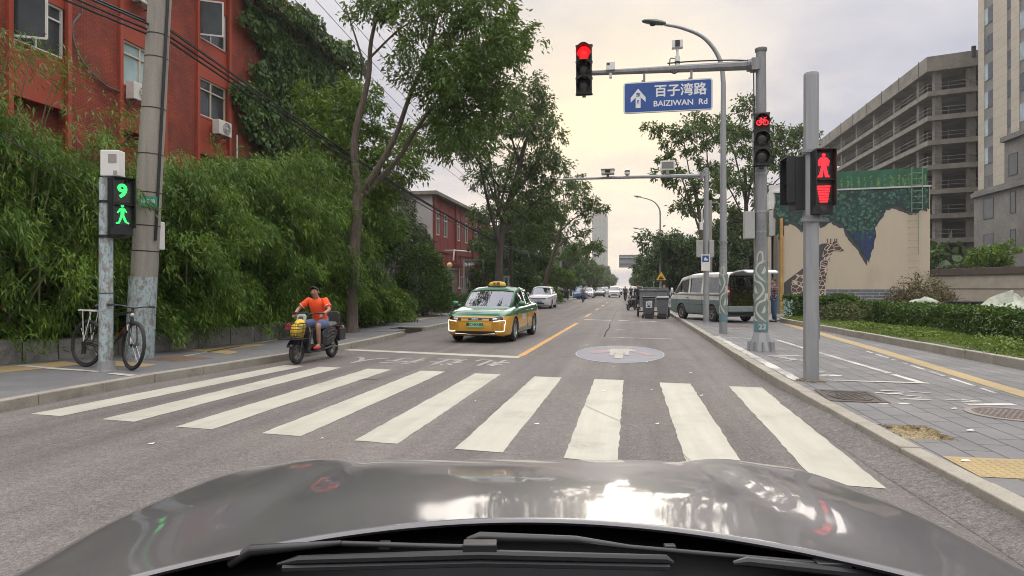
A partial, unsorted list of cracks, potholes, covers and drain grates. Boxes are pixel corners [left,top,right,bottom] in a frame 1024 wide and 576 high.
pothole [879,424,959,441]
manhole cover [964,406,1024,422]
manhole cover [814,389,891,404]
